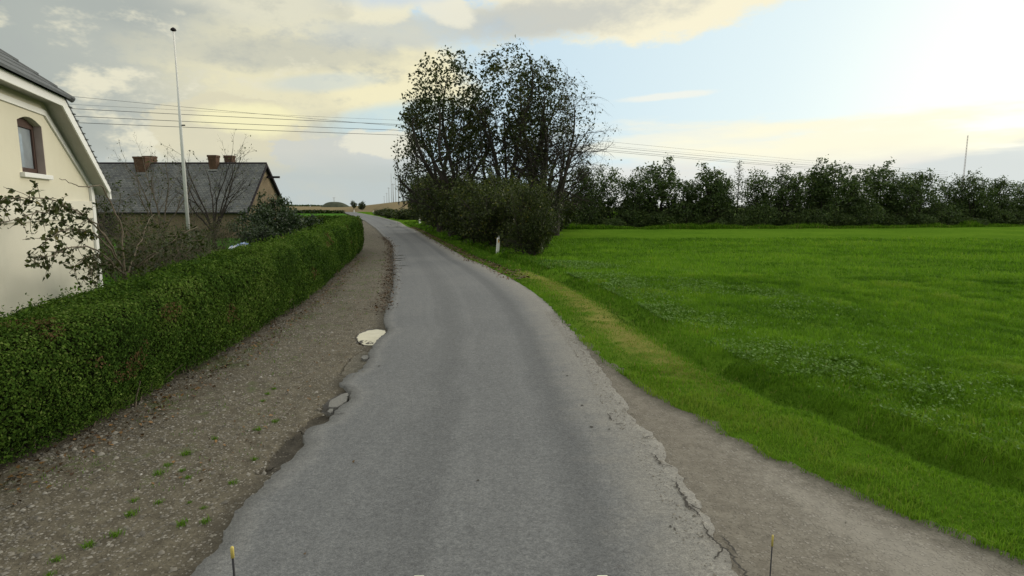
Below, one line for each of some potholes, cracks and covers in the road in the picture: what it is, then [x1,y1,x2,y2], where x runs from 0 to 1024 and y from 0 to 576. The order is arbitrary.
pothole [265,433,304,475]
crack [643,436,747,576]
pothole [300,416,331,435]
